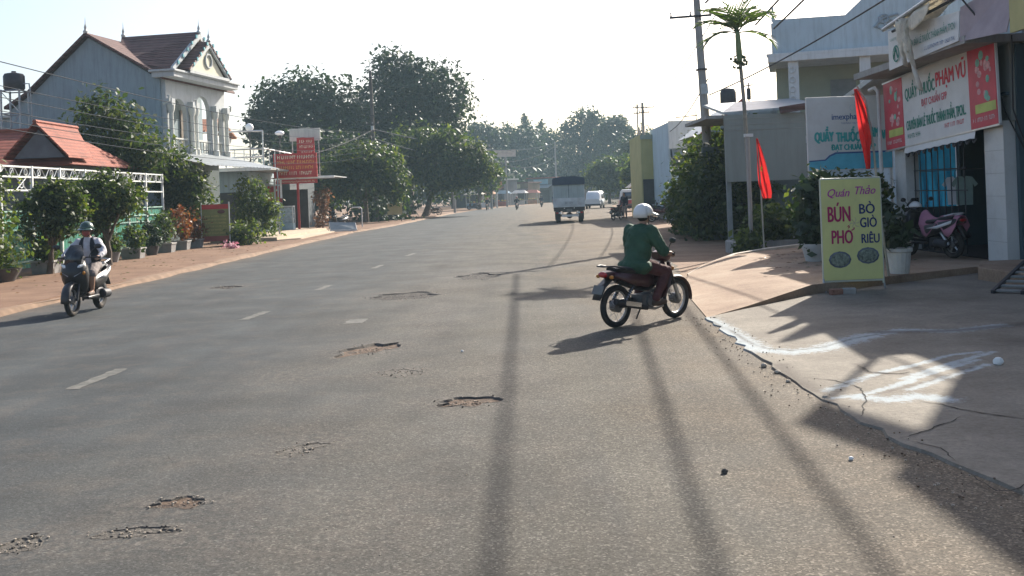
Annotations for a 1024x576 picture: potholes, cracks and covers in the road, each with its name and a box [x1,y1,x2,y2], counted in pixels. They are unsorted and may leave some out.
crack [803,365,907,416]
pothole [454,272,503,280]
pothole [144,495,214,510]
pothole [86,525,186,539]
pothole [363,291,446,300]
pothole [432,394,509,408]
pothole [377,368,427,378]
pothole [274,442,332,457]
pothole [330,342,404,360]
crack [901,401,1024,457]
crack [969,473,1024,494]
pothole [0,532,50,554]
